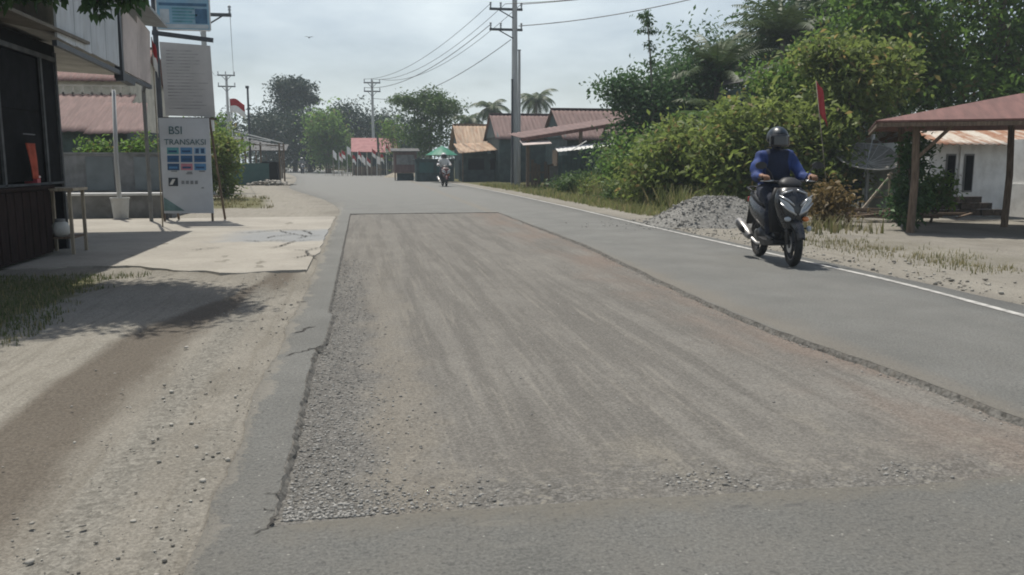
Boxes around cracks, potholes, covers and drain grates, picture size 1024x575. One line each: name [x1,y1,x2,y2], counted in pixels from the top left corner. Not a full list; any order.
crack [253,493,281,534]
